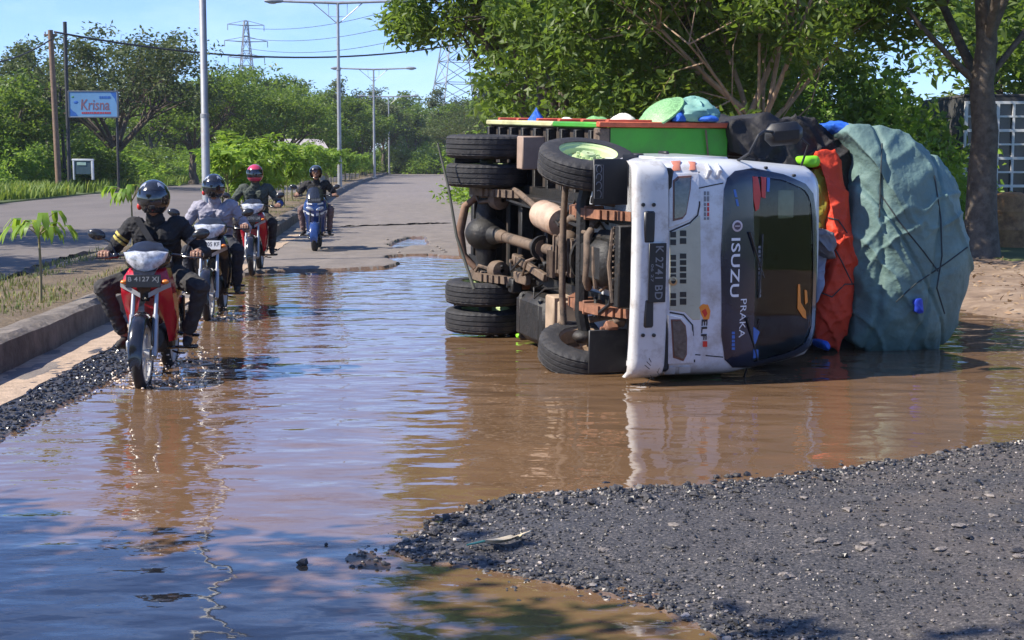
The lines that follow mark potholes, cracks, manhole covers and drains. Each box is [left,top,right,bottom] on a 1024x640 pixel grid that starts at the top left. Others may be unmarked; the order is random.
pothole [0,254,1021,640]
